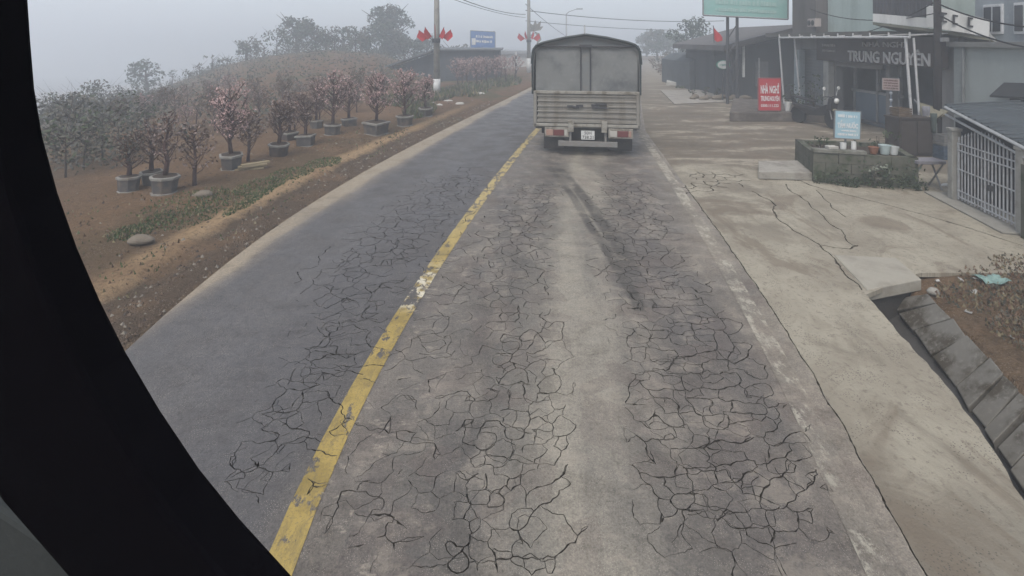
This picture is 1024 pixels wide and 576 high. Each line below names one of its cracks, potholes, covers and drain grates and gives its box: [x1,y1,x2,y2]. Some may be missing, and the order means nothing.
crack [224,167,488,504]
crack [324,185,588,574]
crack [587,174,834,576]
crack [686,188,928,576]
